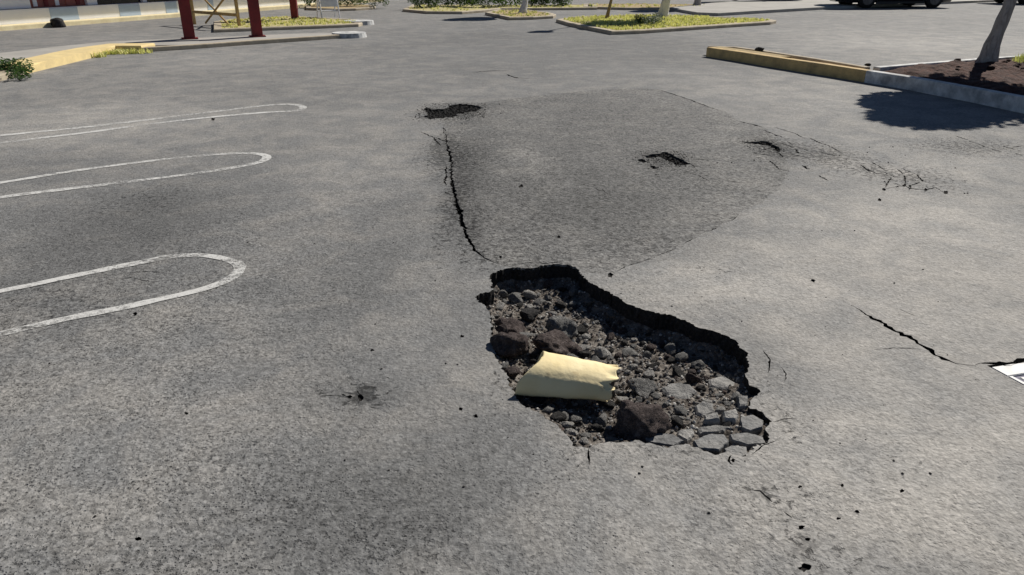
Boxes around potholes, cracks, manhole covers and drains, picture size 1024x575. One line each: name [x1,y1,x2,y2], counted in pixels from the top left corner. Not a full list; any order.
crack [861,162,943,192]
pothole [423,104,480,118]
crack [424,127,556,265]
pothole [475,264,772,459]
crack [854,306,1024,367]
